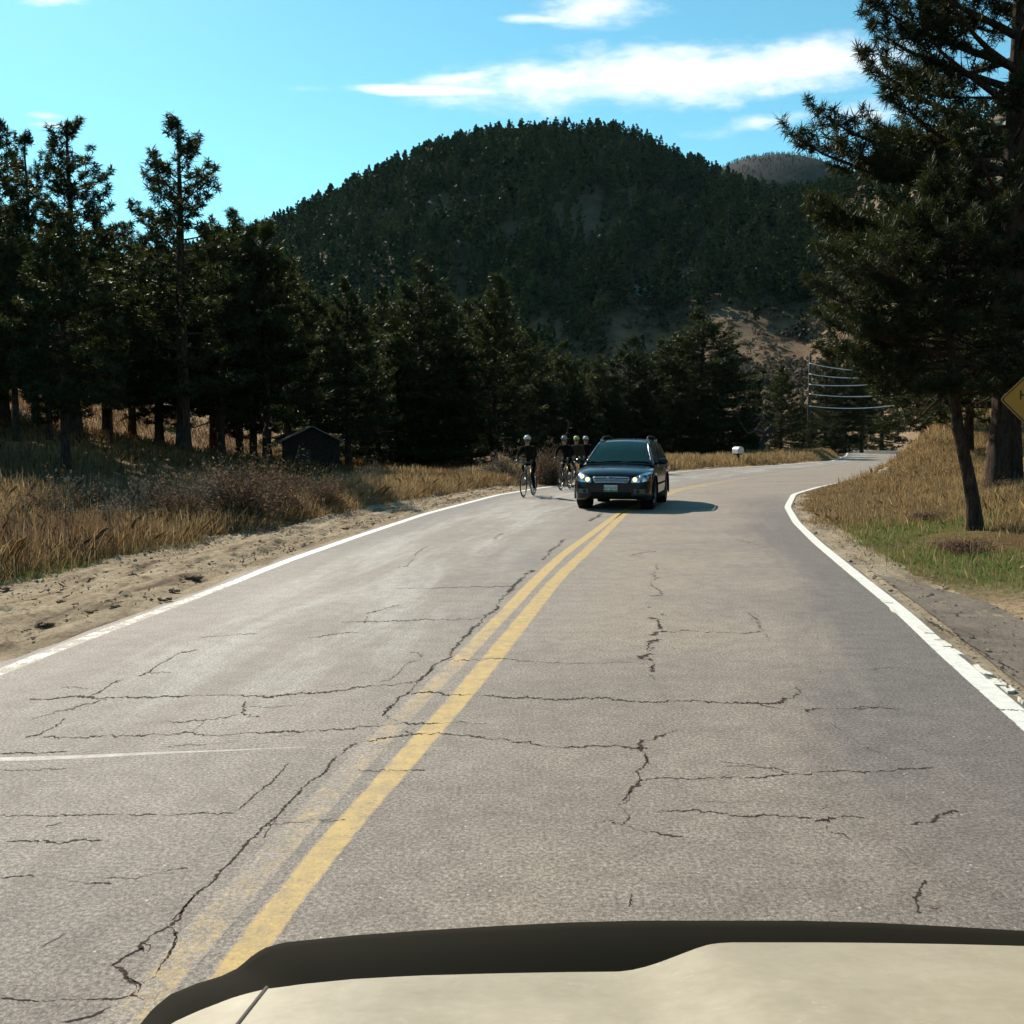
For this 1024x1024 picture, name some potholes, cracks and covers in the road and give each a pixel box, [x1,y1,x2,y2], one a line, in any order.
crack [0,512,932,1023]
crack [912,810,958,825]
